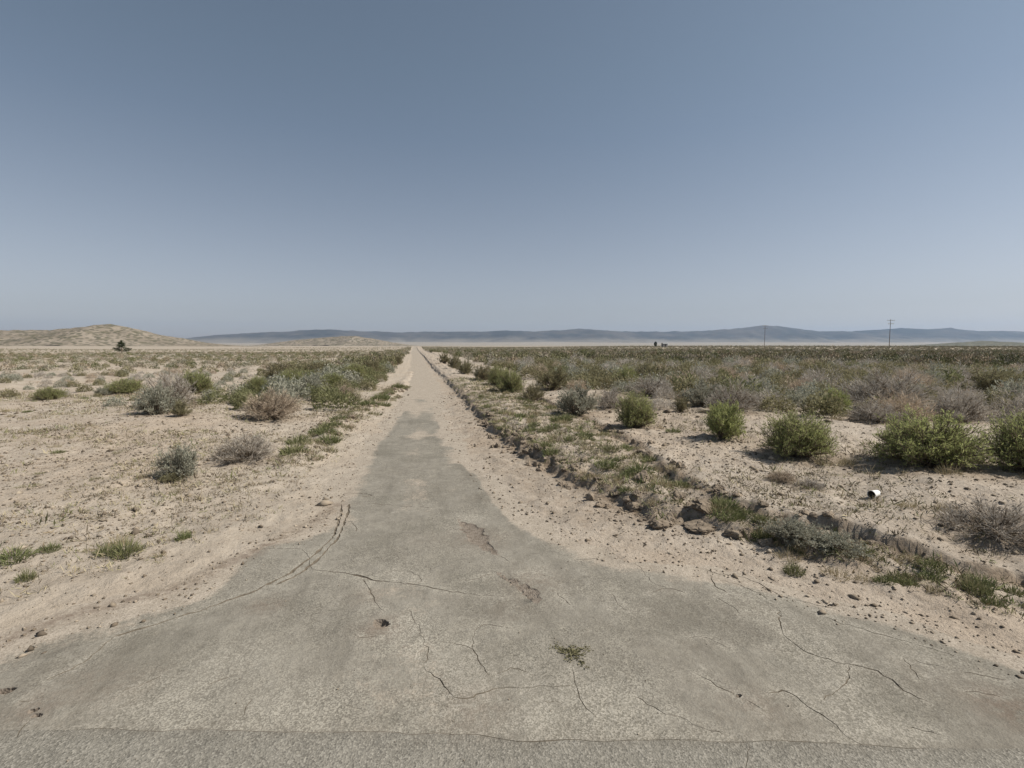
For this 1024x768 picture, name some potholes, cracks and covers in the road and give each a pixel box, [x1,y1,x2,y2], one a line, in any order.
crack [637,697,724,735]
pothole [457,519,498,555]
crack [47,493,510,680]
crack [698,570,1004,751]
pothole [372,619,390,628]
pothole [496,572,542,604]
crack [410,611,592,713]
